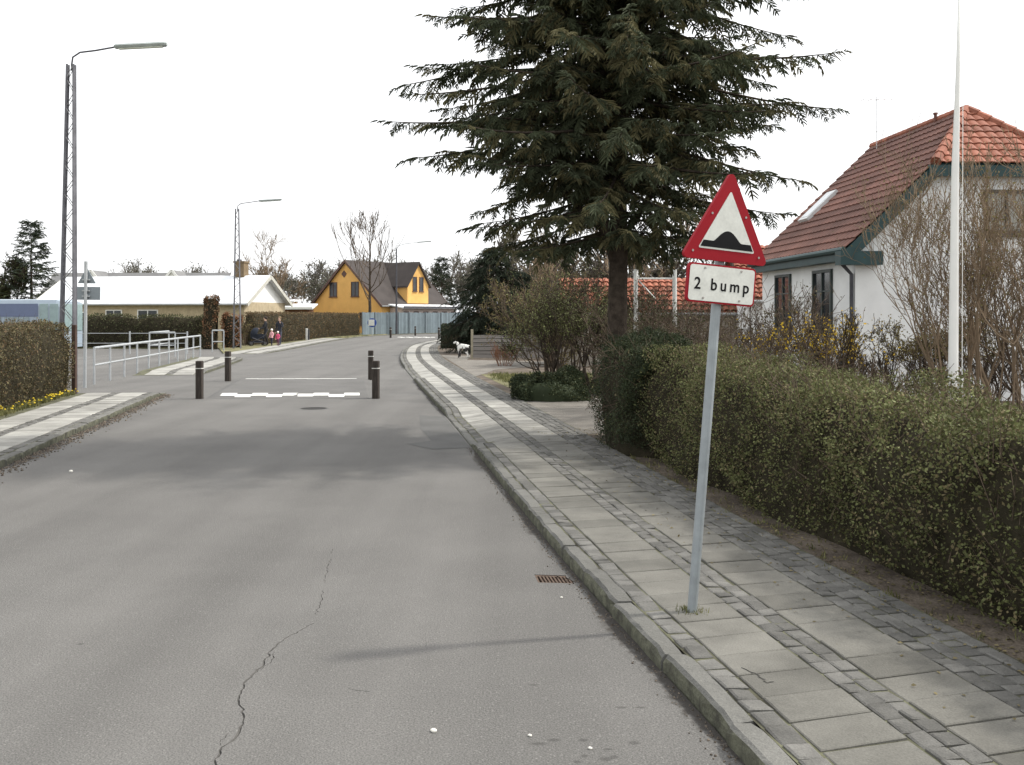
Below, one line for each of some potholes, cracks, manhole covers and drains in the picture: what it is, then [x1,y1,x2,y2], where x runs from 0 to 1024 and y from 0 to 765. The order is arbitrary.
drain grate [535,575,573,583]
crack [214,549,333,765]
